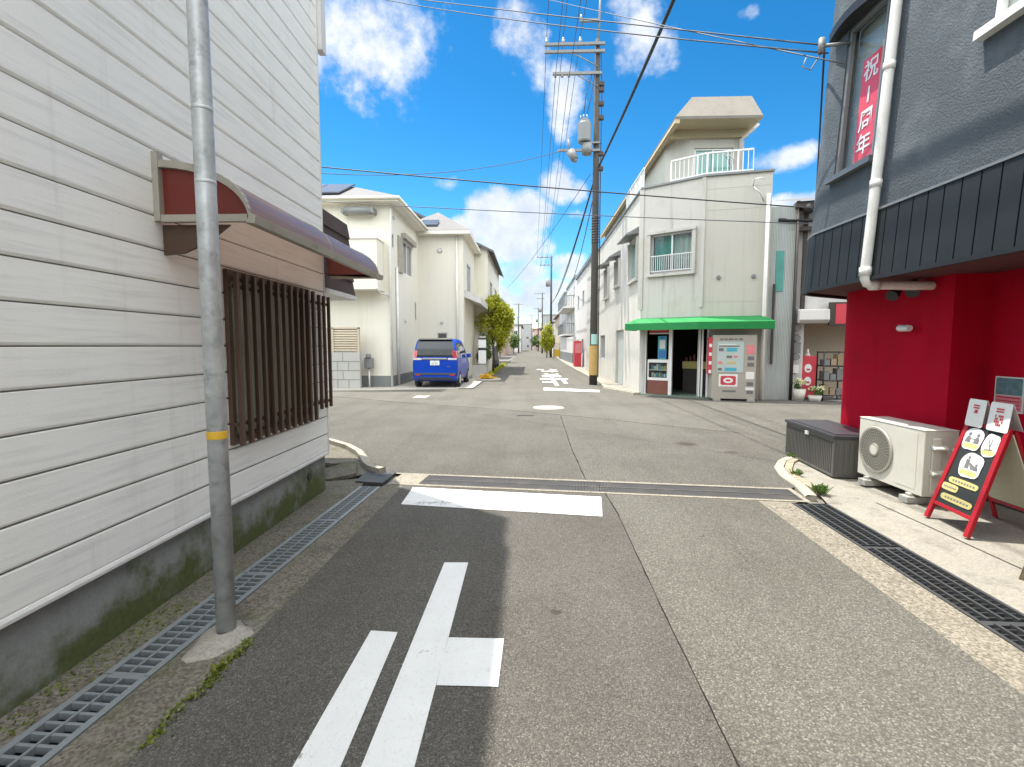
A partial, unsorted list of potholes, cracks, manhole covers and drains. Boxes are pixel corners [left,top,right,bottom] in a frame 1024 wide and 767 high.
drain grate [0,674,149,767]
drain grate [507,478,600,492]
drain grate [976,621,1024,652]
drain grate [316,486,380,521]
drain grate [104,573,274,678]
drain grate [242,519,340,575]
drain grate [859,546,1024,624]
drain grate [599,482,698,496]
drain grate [419,475,512,488]
drain grate [793,503,904,548]
